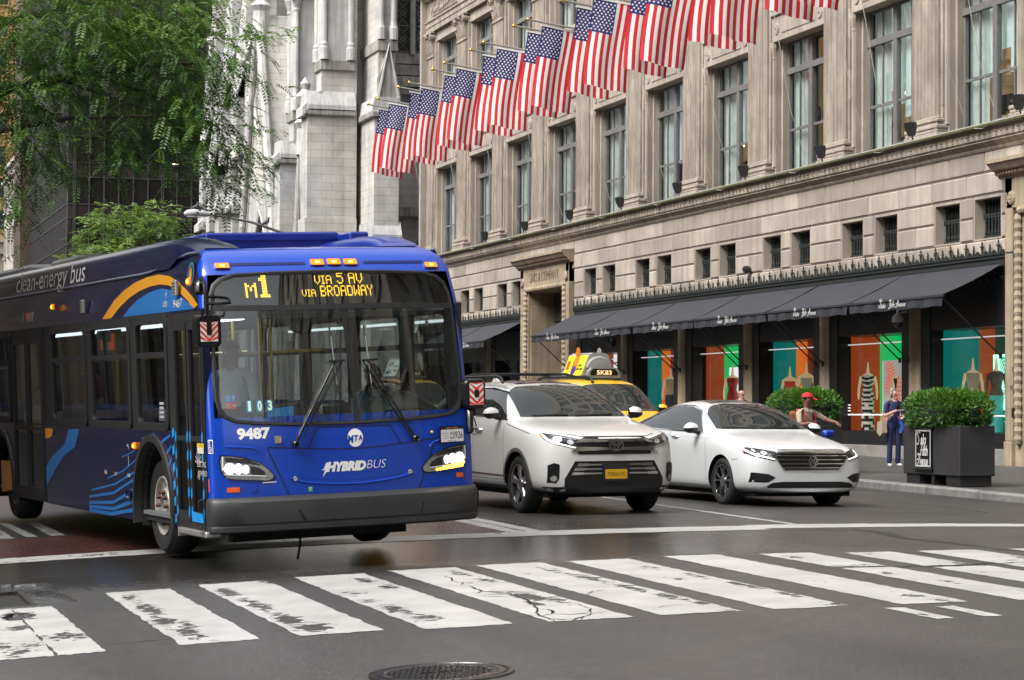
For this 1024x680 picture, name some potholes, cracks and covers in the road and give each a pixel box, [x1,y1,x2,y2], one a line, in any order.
crack [445,576,681,621]
manhole cover [368,662,515,680]
